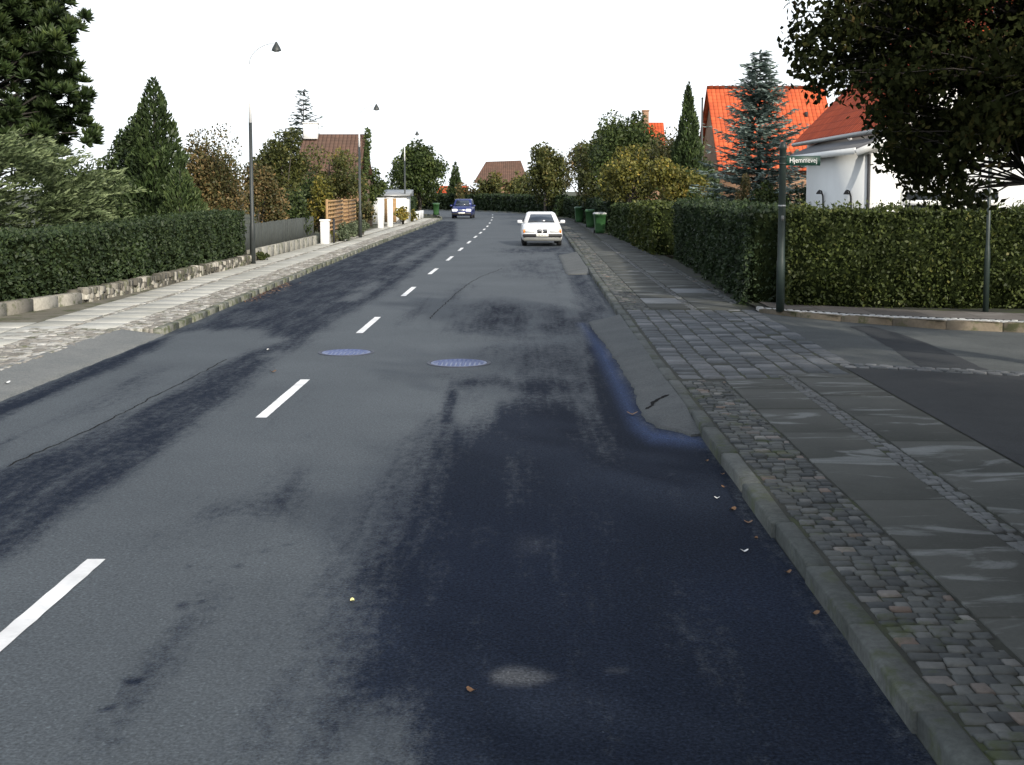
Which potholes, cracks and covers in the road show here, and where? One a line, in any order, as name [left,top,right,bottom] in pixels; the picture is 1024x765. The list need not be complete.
crack [645,395,668,409]
manhole cover [427,358,491,368]
